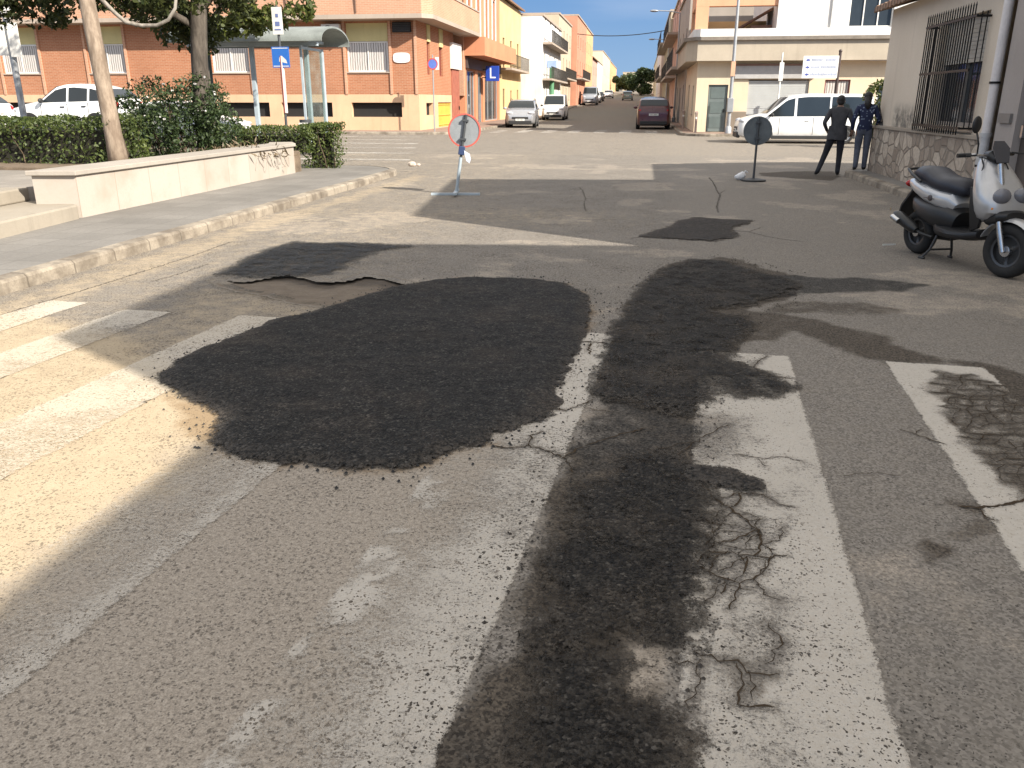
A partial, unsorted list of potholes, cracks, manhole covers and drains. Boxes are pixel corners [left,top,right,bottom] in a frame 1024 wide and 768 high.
pothole [209,272,418,308]
crack [494,428,643,472]
crack [697,484,795,609]
crack [936,372,1024,486]
crack [672,622,784,708]
